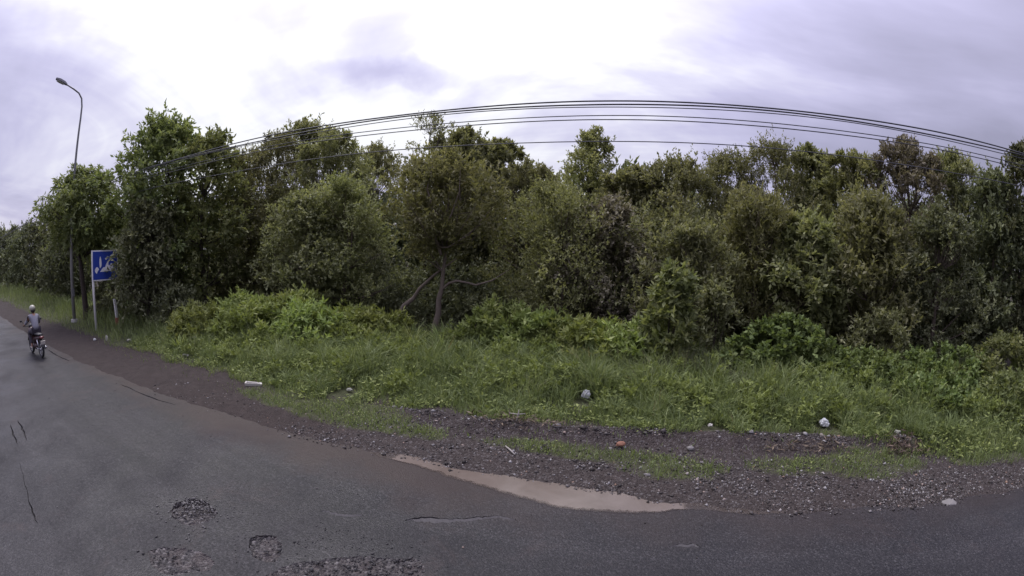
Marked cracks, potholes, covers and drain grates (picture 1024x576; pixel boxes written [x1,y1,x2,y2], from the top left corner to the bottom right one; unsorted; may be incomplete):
crack [10,422,27,443]
pothole [136,535,237,575]
